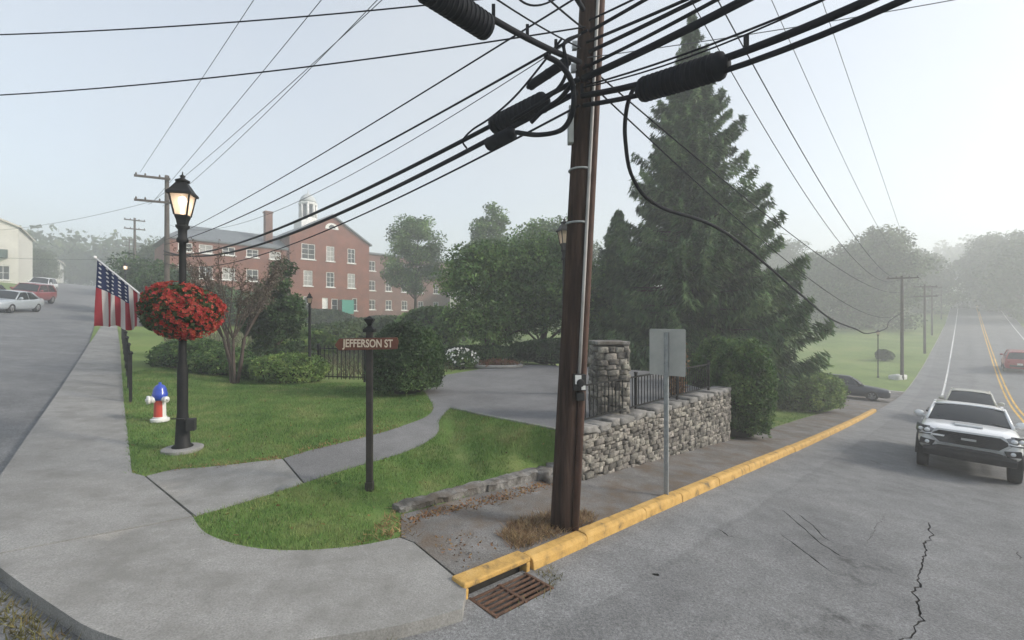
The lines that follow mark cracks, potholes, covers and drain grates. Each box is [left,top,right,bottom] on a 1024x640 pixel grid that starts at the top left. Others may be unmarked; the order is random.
crack [782,511,850,572]
drain grate [452,551,554,619]
crack [899,522,934,640]
